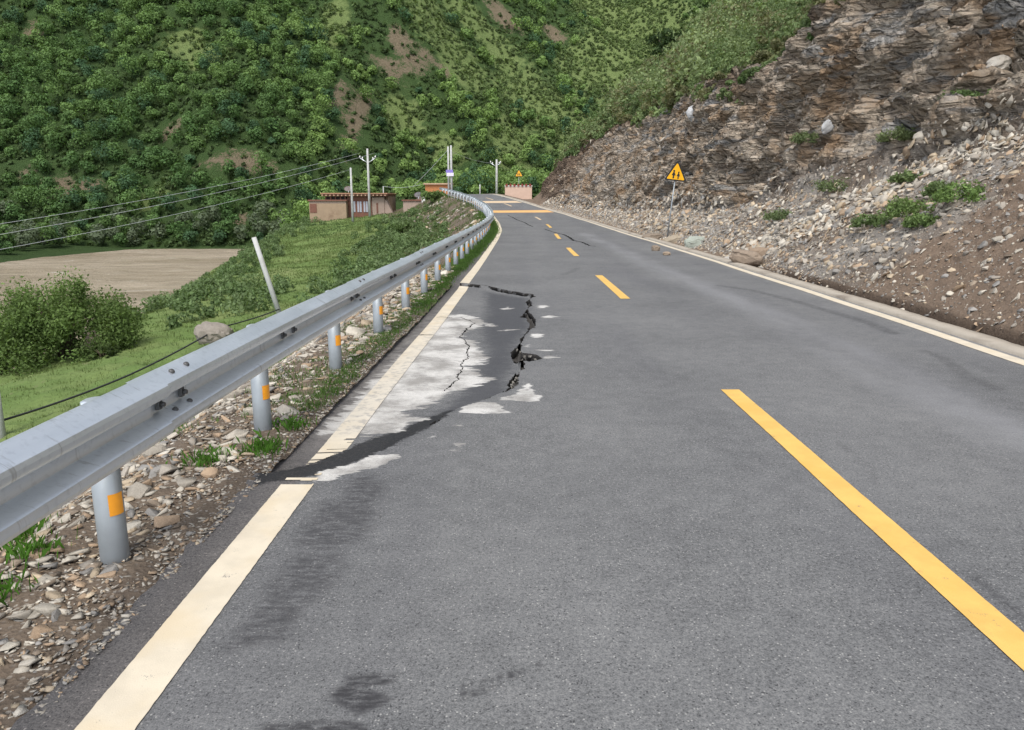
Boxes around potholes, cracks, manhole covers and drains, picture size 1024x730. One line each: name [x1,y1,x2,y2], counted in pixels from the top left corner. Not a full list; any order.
crack [384,283,537,449]
crack [508,215,590,246]
